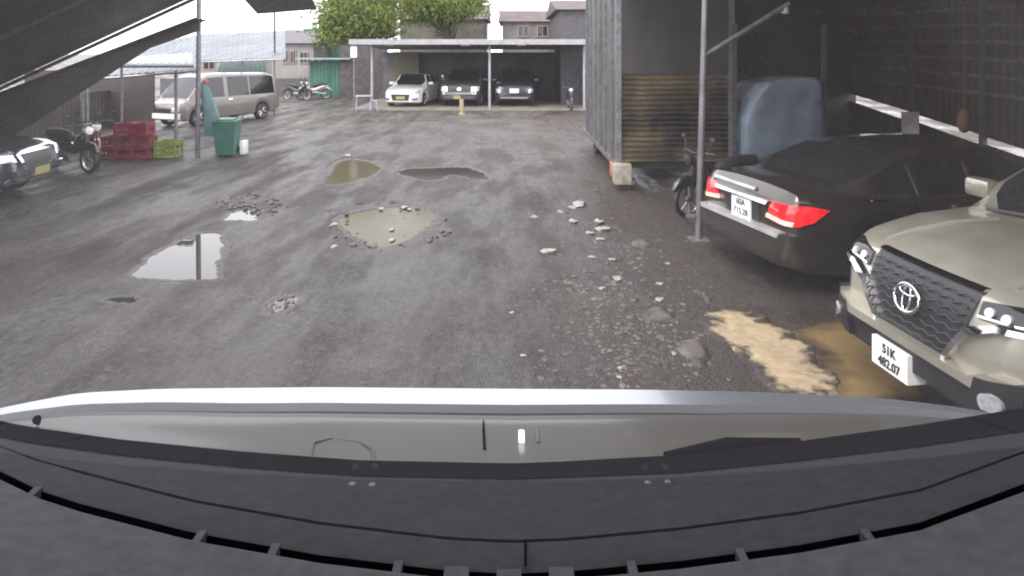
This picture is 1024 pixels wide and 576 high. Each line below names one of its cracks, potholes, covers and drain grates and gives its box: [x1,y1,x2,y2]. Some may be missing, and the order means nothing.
pothole [331,204,443,249]
pothole [316,158,387,185]
pothole [123,230,232,282]
pothole [392,166,494,181]
pothole [256,293,310,317]
pothole [217,208,266,222]
pothole [95,294,147,305]
